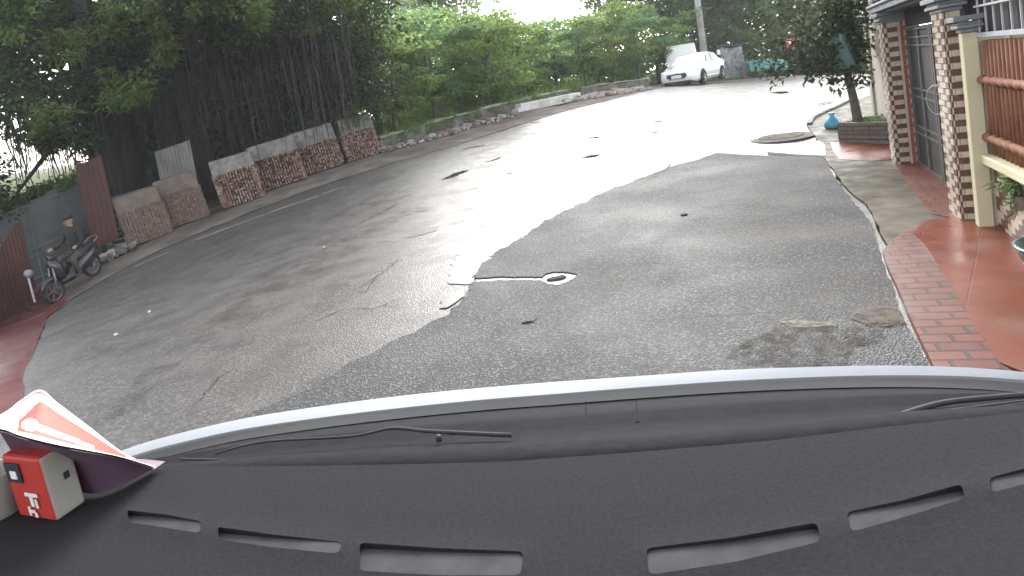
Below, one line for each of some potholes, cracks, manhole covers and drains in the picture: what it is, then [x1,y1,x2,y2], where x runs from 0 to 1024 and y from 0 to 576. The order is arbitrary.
manhole cover [750,132,815,143]
crack [354,259,399,309]
